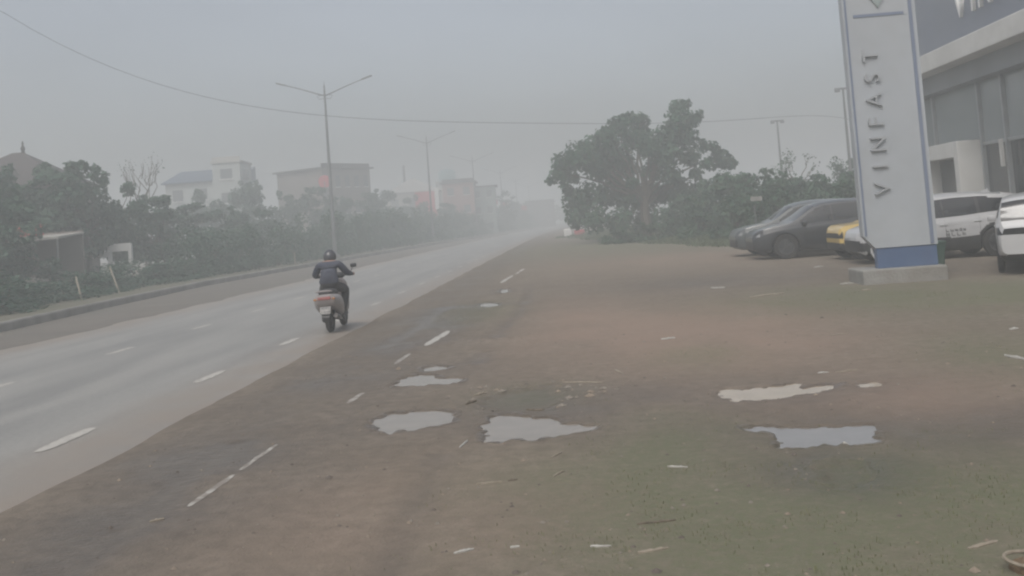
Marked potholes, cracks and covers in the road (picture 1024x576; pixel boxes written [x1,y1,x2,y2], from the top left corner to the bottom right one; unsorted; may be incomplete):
pothole [389,372,469,387]
pothole [364,408,463,435]
pothole [718,382,849,402]
pothole [415,364,456,374]
pothole [474,411,604,444]
pothole [733,423,887,450]
